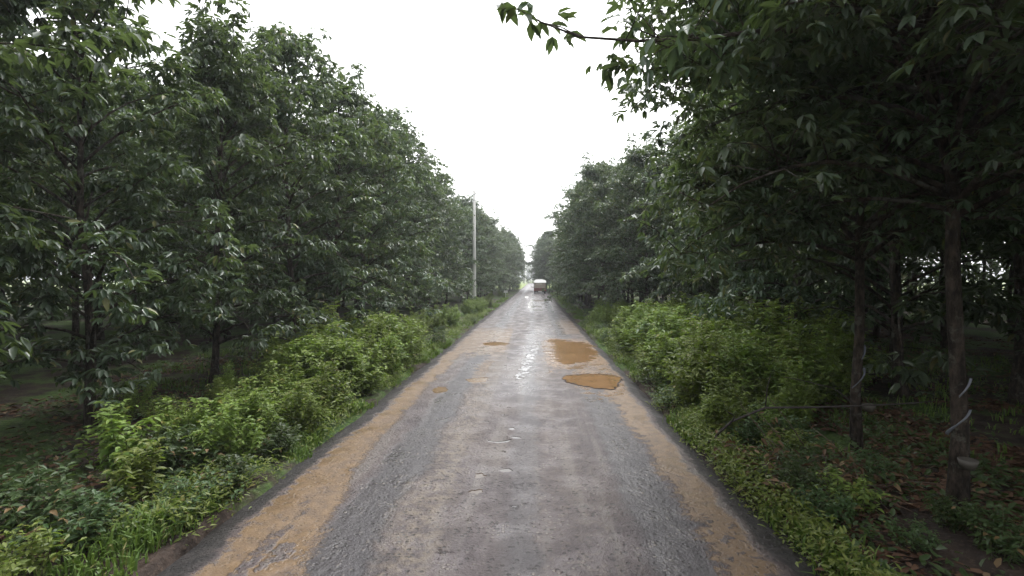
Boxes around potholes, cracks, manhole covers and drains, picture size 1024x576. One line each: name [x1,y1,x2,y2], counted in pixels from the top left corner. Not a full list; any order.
pothole [562,373,623,390]
pothole [542,339,600,365]
